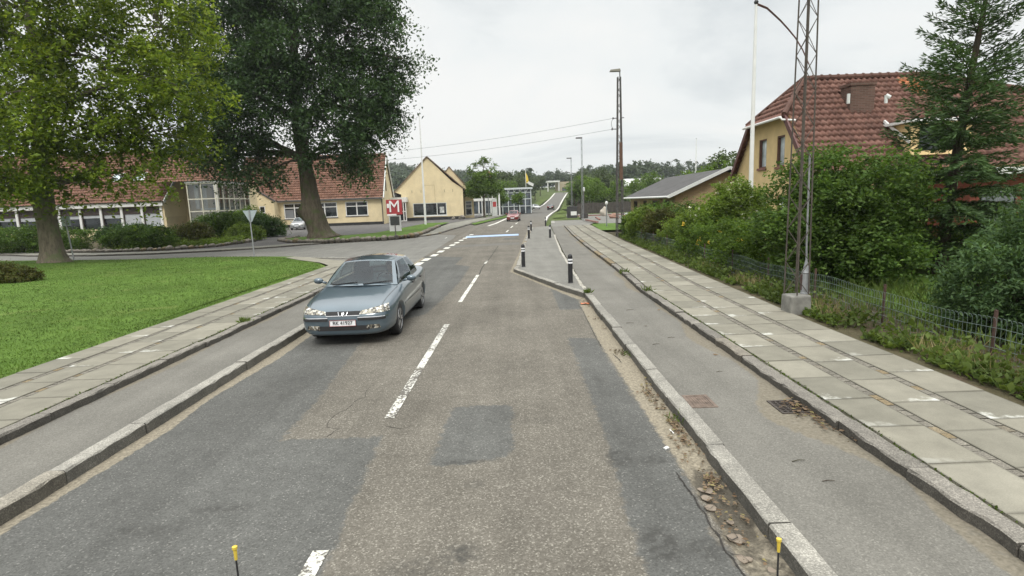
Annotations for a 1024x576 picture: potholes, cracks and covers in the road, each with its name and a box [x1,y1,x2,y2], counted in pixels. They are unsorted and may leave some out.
crack [676,472,749,576]
manhole cover [681,394,718,408]
drain grate [766,400,810,414]
